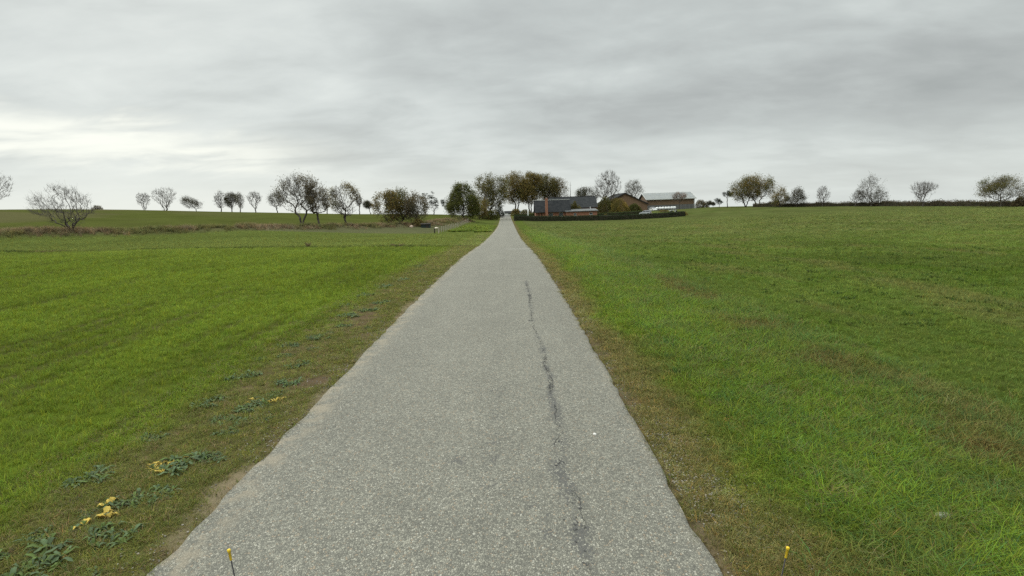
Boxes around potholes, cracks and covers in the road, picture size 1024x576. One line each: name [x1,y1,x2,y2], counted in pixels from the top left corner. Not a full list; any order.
crack [525,284,591,571]
